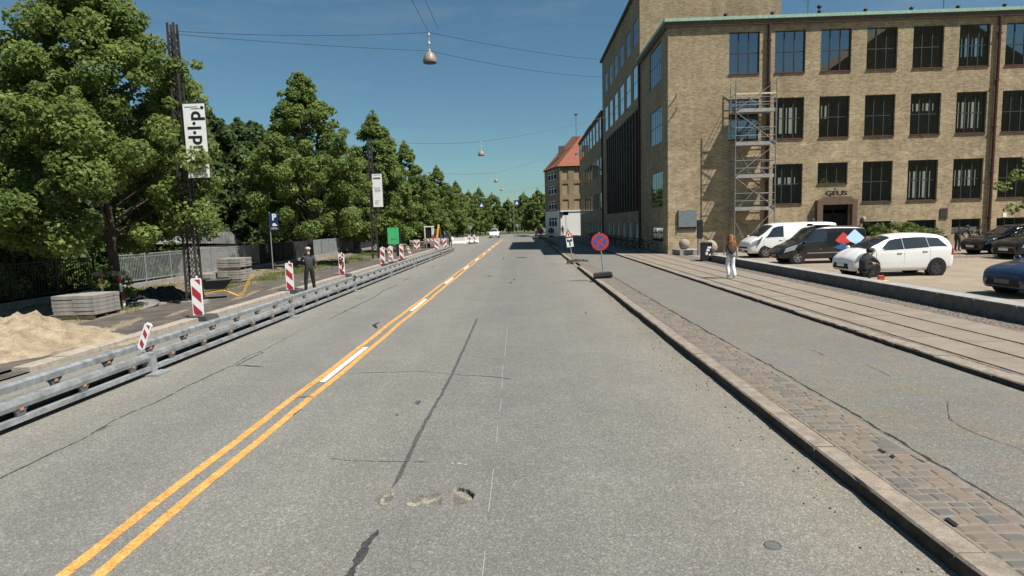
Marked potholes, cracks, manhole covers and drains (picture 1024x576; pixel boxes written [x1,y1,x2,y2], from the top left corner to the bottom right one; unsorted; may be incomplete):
pothole [373,490,396,507]
pothole [451,487,476,506]
pothole [407,492,443,507]
crack [330,279,407,328]
manhole cover [764,541,782,550]
